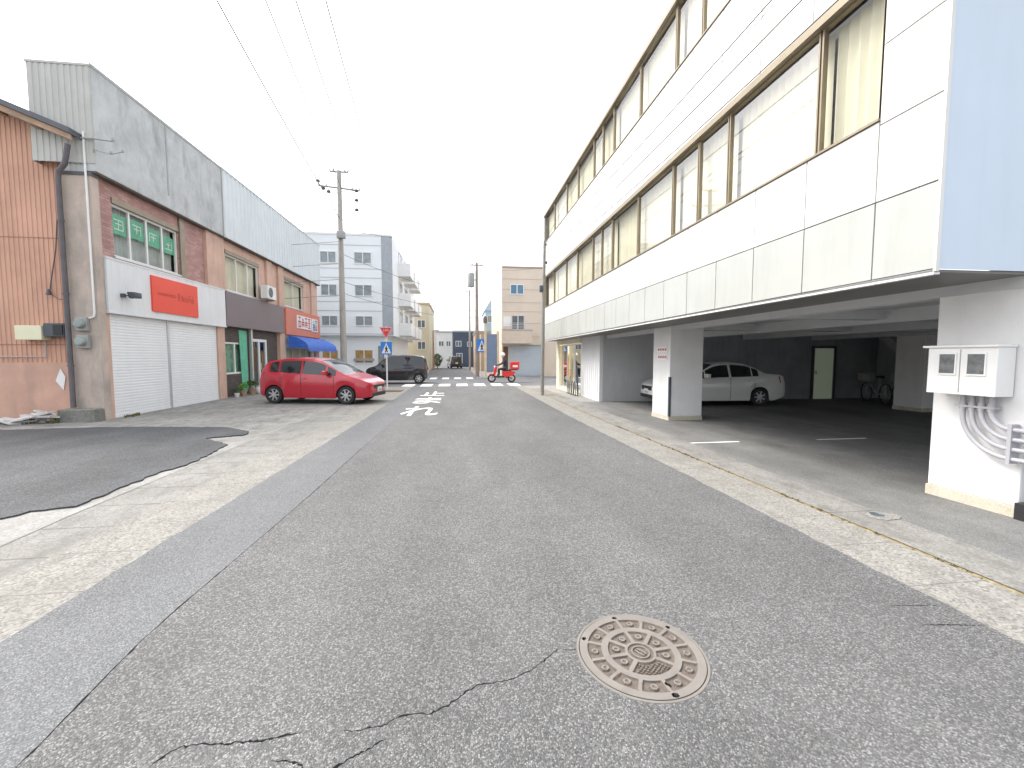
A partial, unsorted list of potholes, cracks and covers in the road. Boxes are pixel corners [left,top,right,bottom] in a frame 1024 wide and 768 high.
manhole cover [576,614,711,704]
crack [149,732,302,768]
crack [333,649,576,768]
